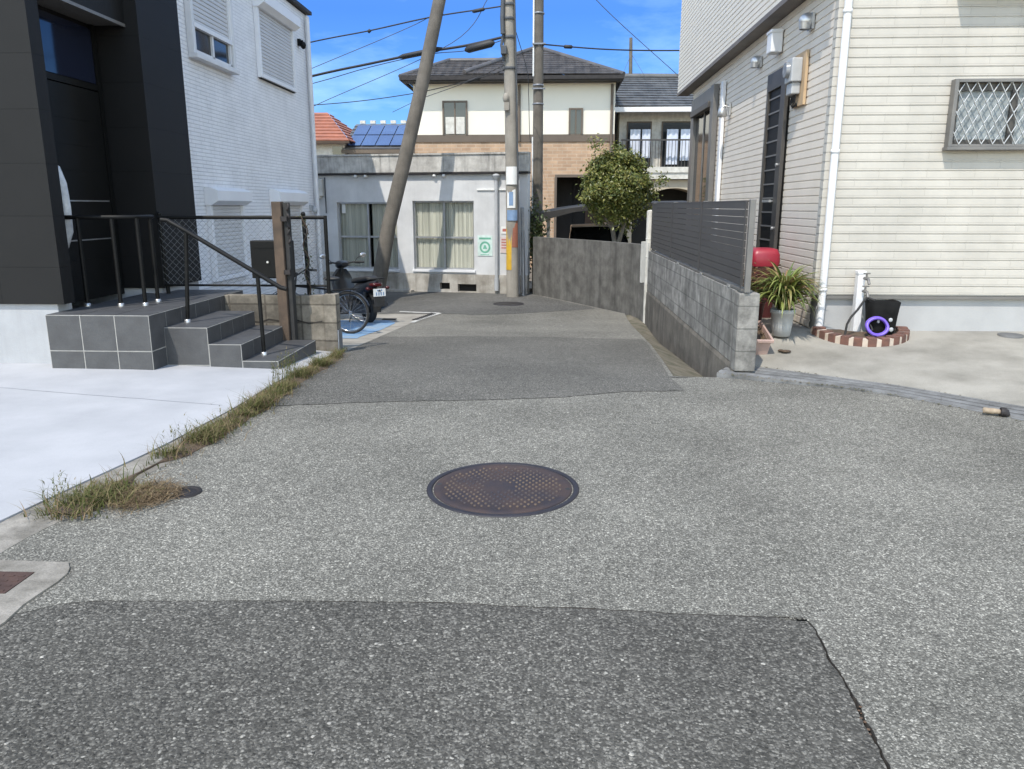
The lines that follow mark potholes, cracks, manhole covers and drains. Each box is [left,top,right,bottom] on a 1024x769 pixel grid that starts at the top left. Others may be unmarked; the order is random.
utility cover [170,486,202,499]
manhole cover [427,462,579,518]
crack [17,600,891,769]
